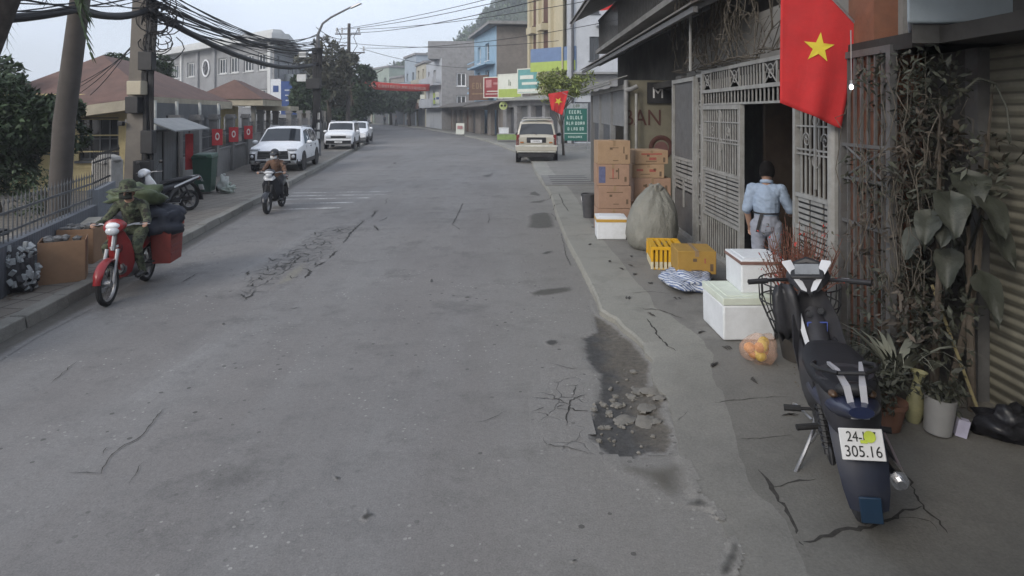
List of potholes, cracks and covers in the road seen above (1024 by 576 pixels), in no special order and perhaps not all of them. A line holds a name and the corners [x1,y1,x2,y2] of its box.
crack [528,362,604,464]
crack [225,201,387,309]
crack [759,471,948,545]
crack [78,412,161,477]
pothole [579,299,677,461]
